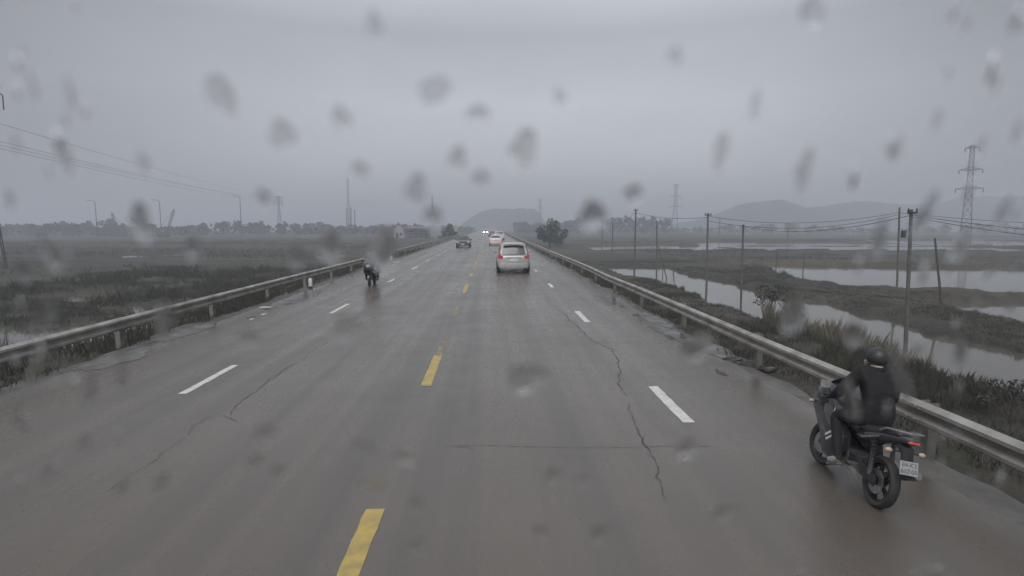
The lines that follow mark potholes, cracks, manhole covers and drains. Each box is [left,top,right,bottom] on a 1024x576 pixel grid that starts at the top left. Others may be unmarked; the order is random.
crack [544,297,666,499]
crack [113,339,331,487]
